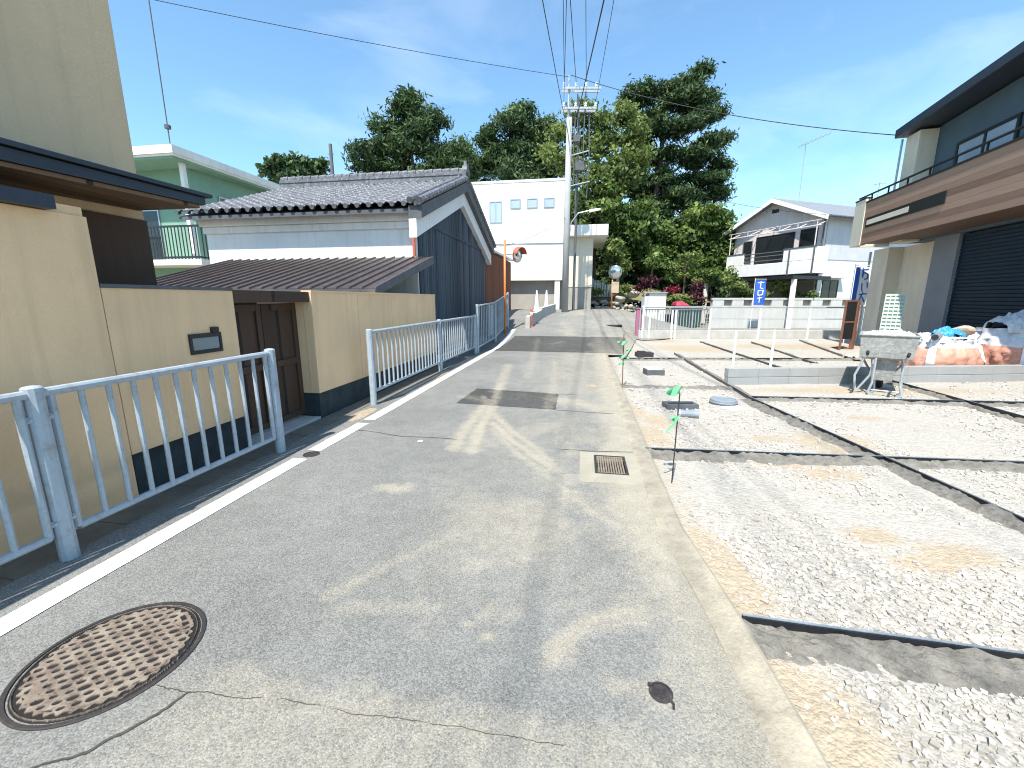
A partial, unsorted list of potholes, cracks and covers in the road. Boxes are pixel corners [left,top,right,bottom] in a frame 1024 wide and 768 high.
crack [31,685,563,768]
manhole cover [0,602,207,731]
